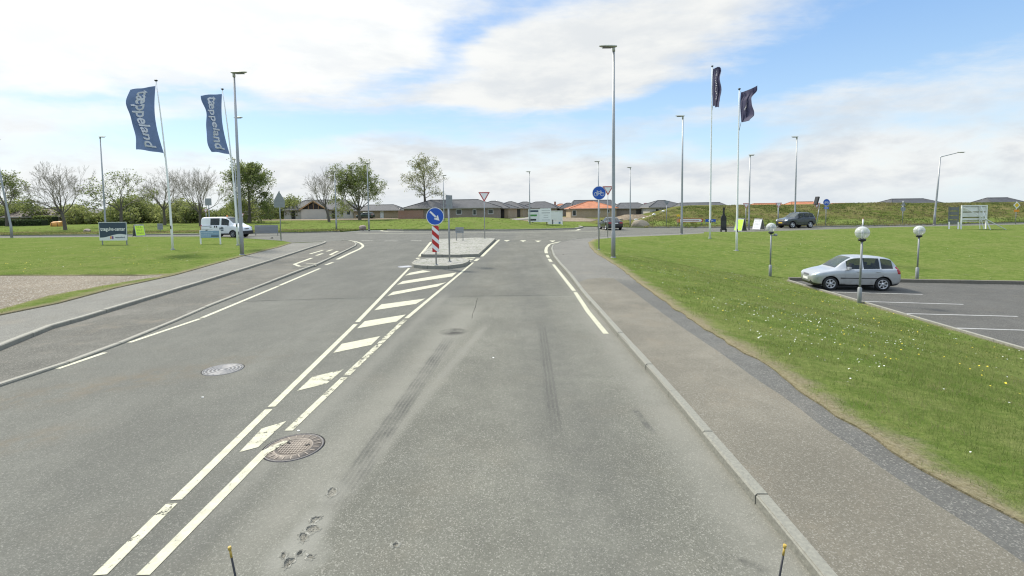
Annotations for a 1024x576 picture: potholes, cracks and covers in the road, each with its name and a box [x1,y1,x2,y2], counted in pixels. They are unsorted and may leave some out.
pothole [297,530,310,544]
pothole [325,487,339,499]
pothole [303,523,323,535]
manhole cover [262,433,325,462]
pothole [280,555,297,570]
manhole cover [201,363,245,376]
